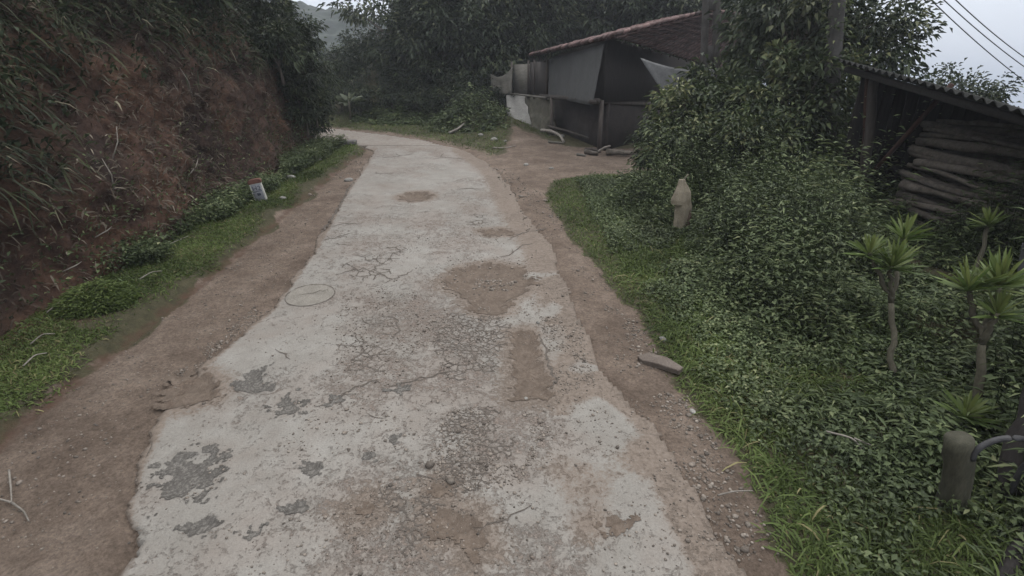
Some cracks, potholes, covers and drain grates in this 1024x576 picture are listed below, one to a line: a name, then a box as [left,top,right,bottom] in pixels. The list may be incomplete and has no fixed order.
manhole cover [285,284,335,306]
pothole [293,460,323,478]
crack [302,182,412,295]
crack [377,406,531,557]
pothole [140,442,233,518]
crack [315,312,512,419]
pothole [172,513,233,538]
pothole [225,362,276,395]
pothole [262,388,310,418]
